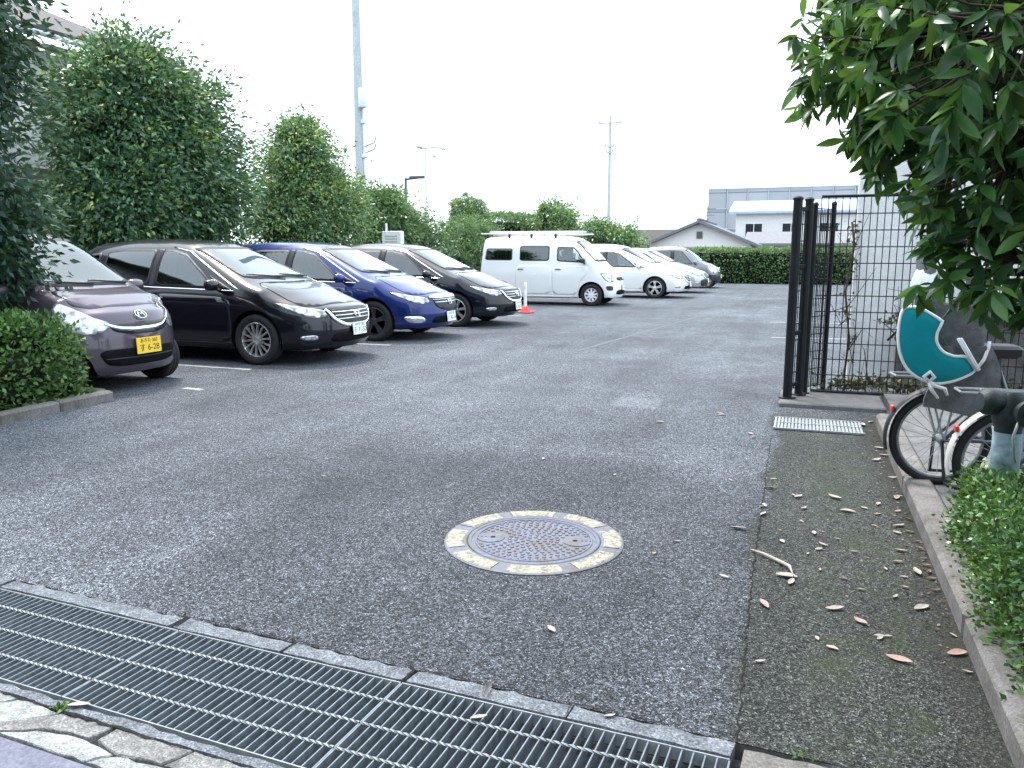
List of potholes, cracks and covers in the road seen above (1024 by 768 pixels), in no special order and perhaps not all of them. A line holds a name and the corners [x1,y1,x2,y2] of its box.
drain grate [0,588,178,701]
drain grate [772,416,865,435]
manhole cover [444,511,624,576]
drain grate [62,630,401,768]
drain grate [314,682,730,768]
